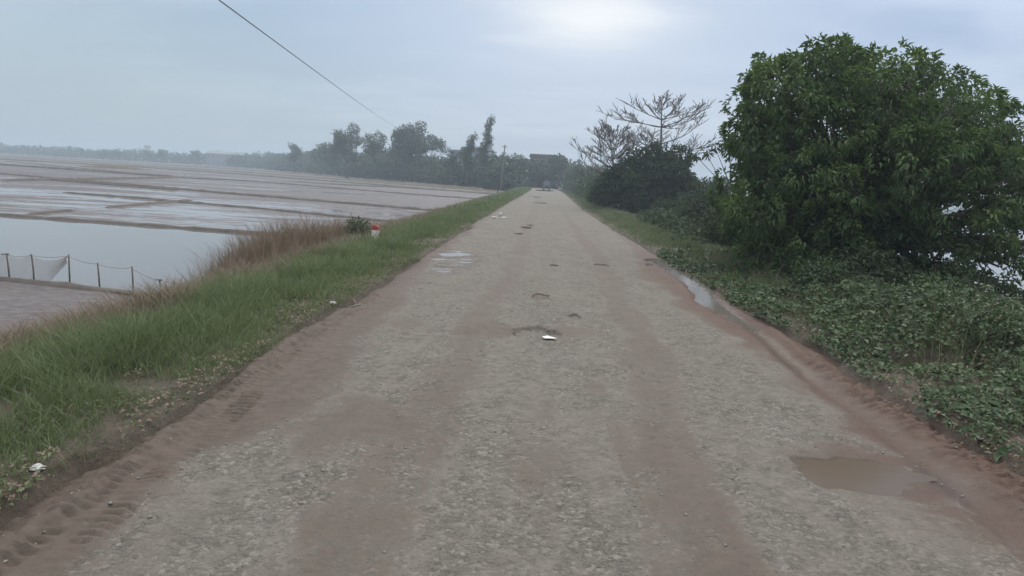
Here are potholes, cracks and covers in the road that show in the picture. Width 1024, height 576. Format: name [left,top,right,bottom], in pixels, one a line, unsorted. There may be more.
pothole [508,325,565,340]
pothole [779,454,948,500]
pothole [531,293,551,302]
